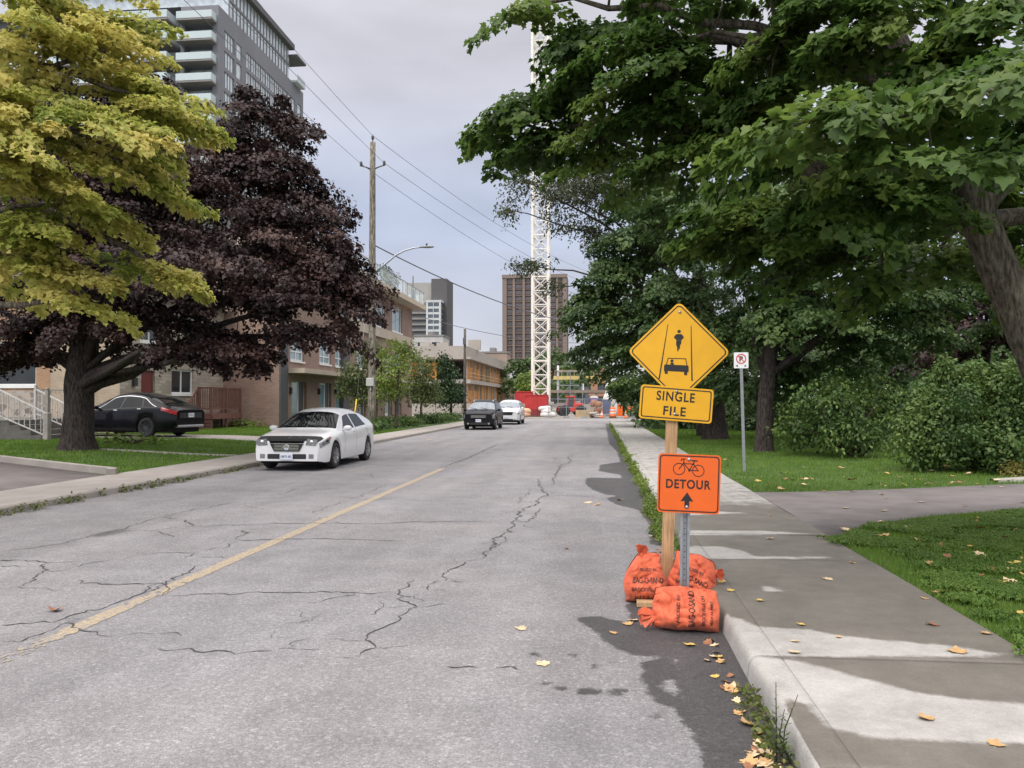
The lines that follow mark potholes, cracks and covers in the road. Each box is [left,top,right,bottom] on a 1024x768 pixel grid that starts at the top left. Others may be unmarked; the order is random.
crack [332,457,617,658]
crack [2,474,450,654]
